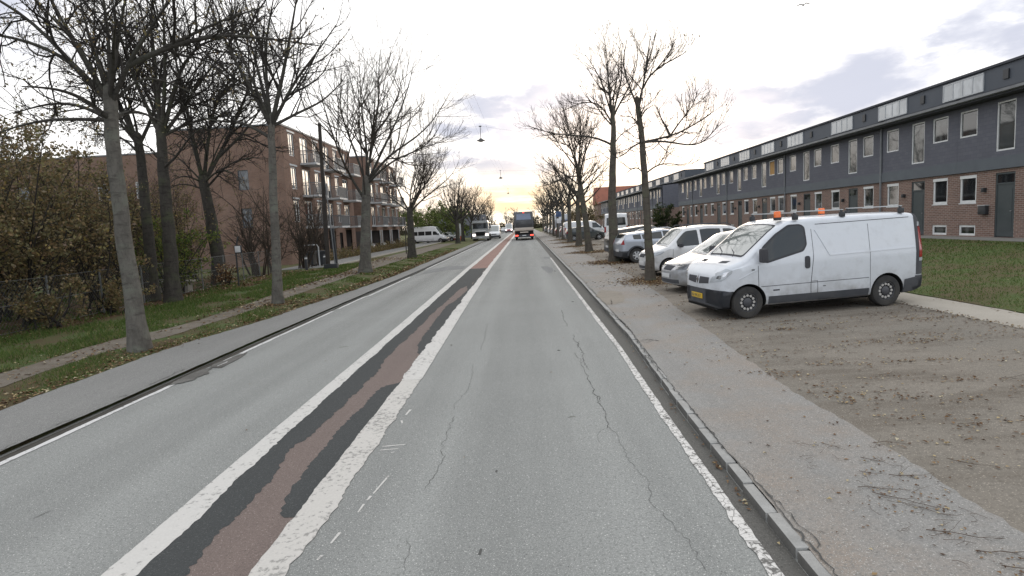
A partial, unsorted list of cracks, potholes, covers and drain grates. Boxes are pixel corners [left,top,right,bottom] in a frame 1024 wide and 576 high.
crack [561,310,706,570]
crack [424,368,474,490]
crack [589,297,838,576]
